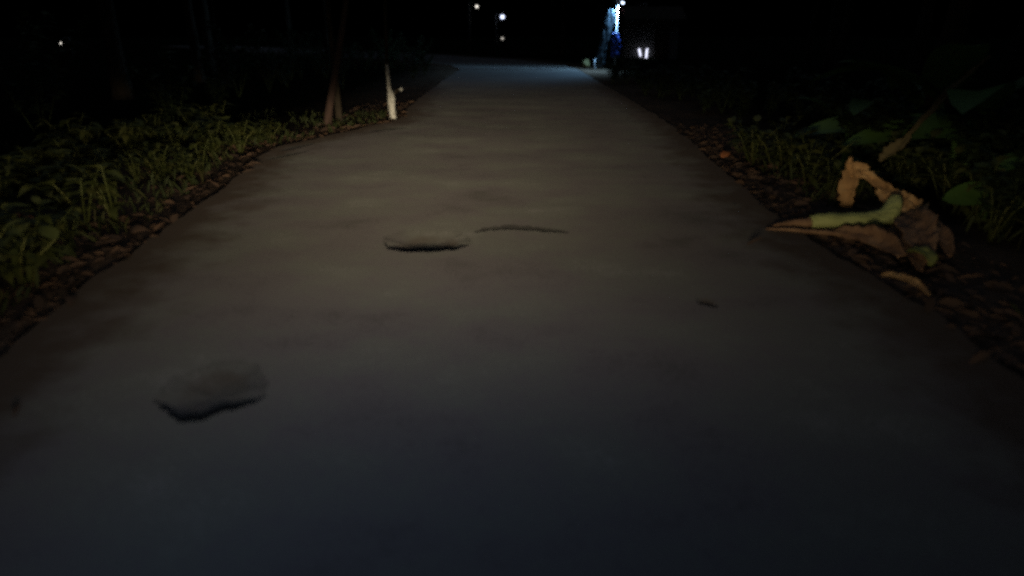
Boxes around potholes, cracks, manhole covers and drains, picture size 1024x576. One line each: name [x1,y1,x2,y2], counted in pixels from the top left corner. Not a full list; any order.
crack [474,225,569,233]
pothole [152,360,270,423]
pothole [383,230,472,252]
